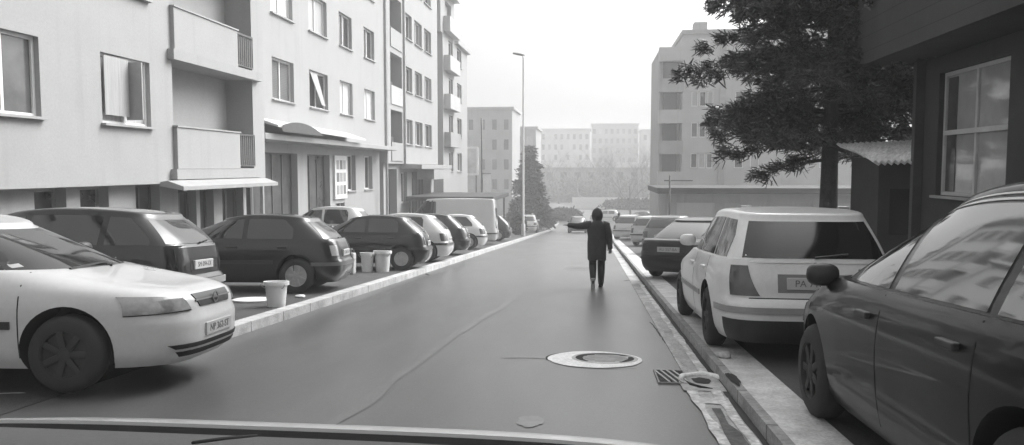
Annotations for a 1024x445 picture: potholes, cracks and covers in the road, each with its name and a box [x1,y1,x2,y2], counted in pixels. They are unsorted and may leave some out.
drain grate [653,369,690,385]
manhole cover [548,351,642,368]
